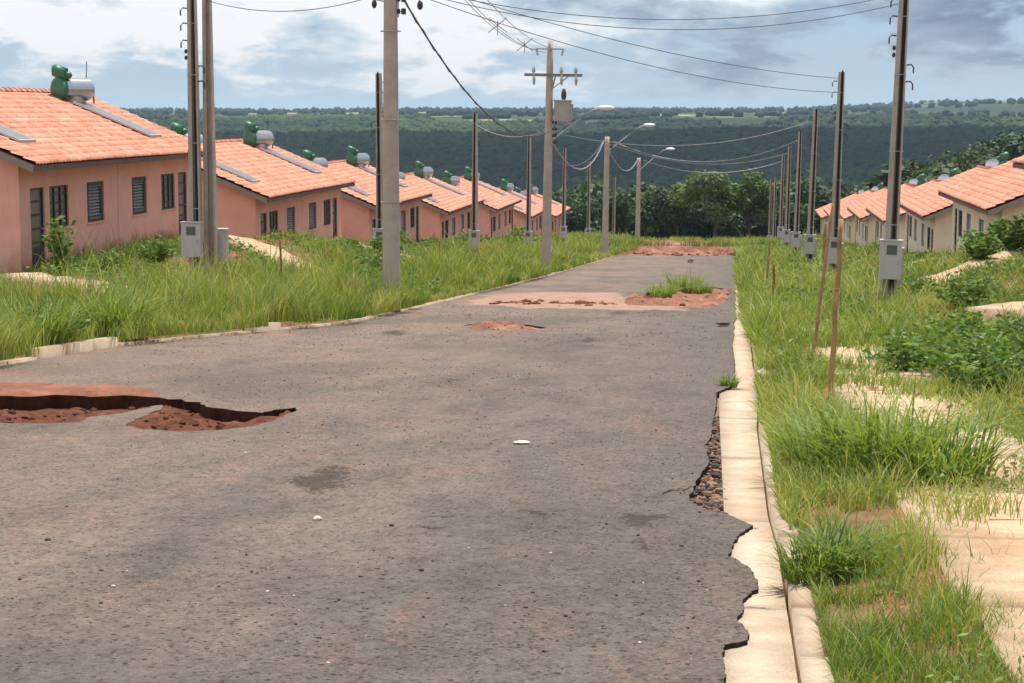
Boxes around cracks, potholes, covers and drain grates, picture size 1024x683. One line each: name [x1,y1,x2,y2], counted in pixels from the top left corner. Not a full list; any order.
pothole [690,398,728,514]
pothole [465,319,544,330]
pothole [0,395,297,432]
pothole [625,287,731,308]
